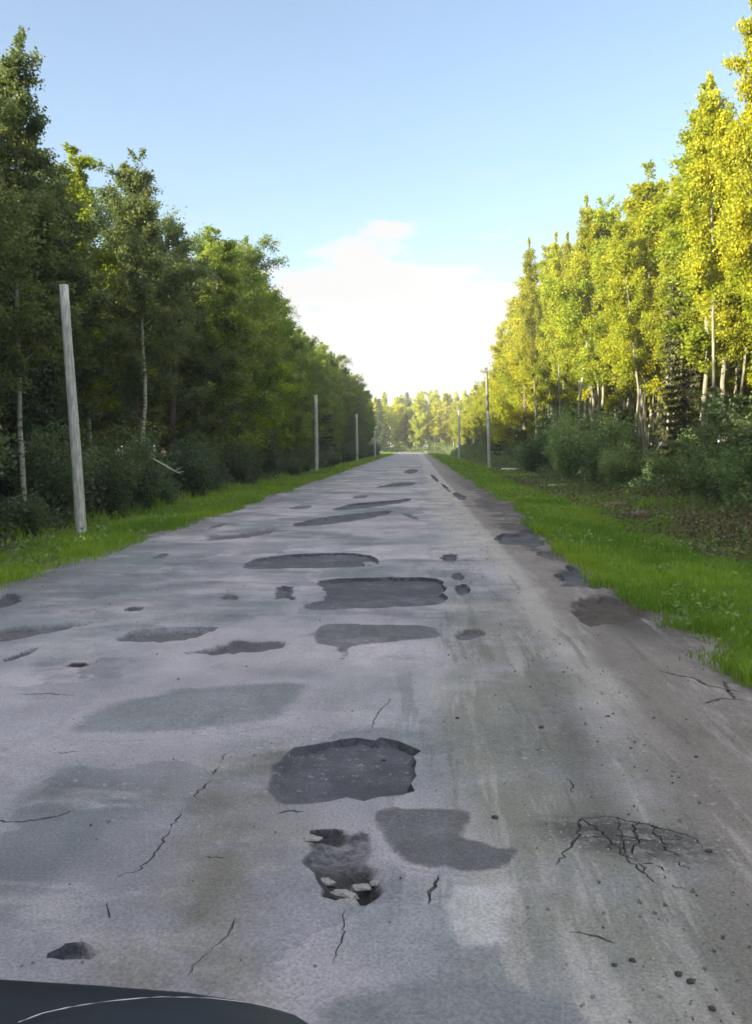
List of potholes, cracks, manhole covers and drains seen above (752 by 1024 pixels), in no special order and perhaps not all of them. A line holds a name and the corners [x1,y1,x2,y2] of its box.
crack [556,816,702,889]
crack [659,670,744,704]
pothole [271,586,298,600]
crack [333,910,346,960]
crack [118,745,241,877]
pothole [47,942,103,960]
pothole [301,828,392,909]
